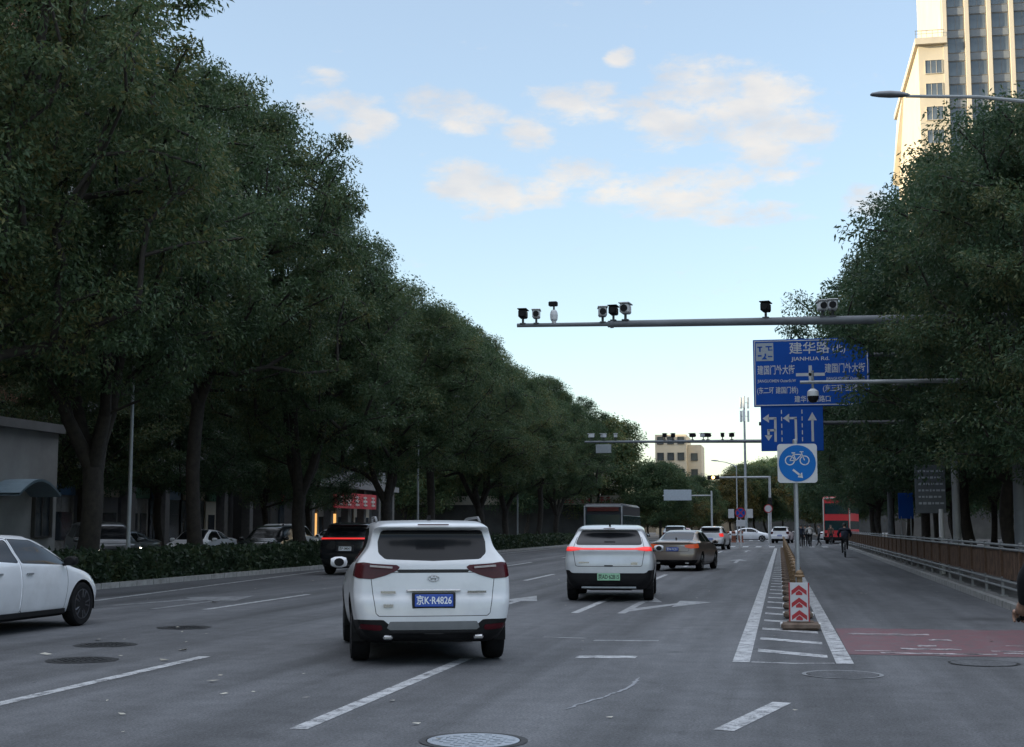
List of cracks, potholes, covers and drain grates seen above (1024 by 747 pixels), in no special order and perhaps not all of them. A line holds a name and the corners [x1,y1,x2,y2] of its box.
manhole cover [419,732,528,747]
crack [567,677,640,709]
manhole cover [802,670,884,678]
